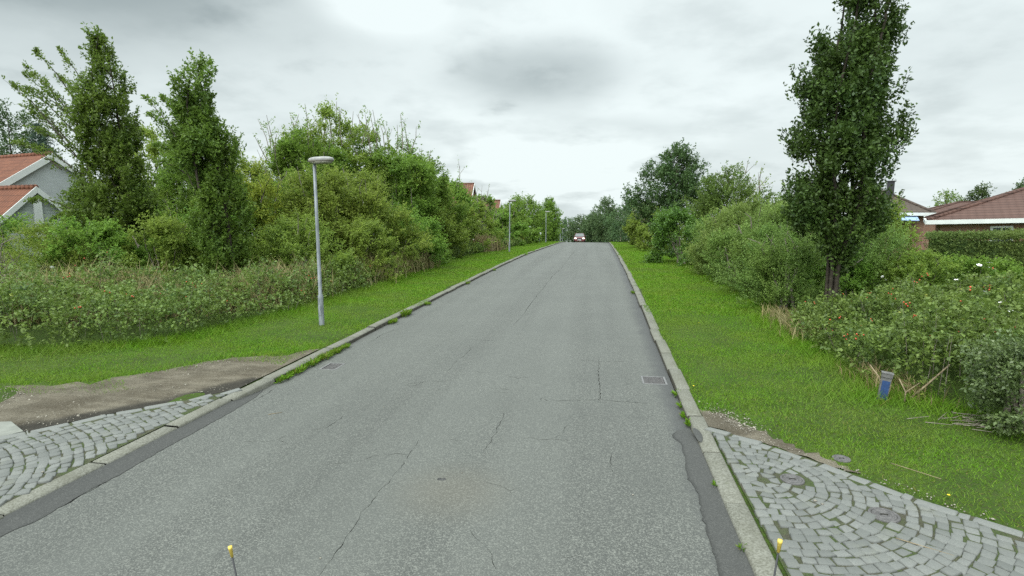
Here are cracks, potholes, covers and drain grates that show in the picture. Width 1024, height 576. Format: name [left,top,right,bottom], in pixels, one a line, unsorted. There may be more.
manhole cover [780,474,805,485]
crack [319,442,418,576]
manhole cover [832,454,851,463]
drain grate [641,376,668,385]
manhole cover [867,507,901,523]
